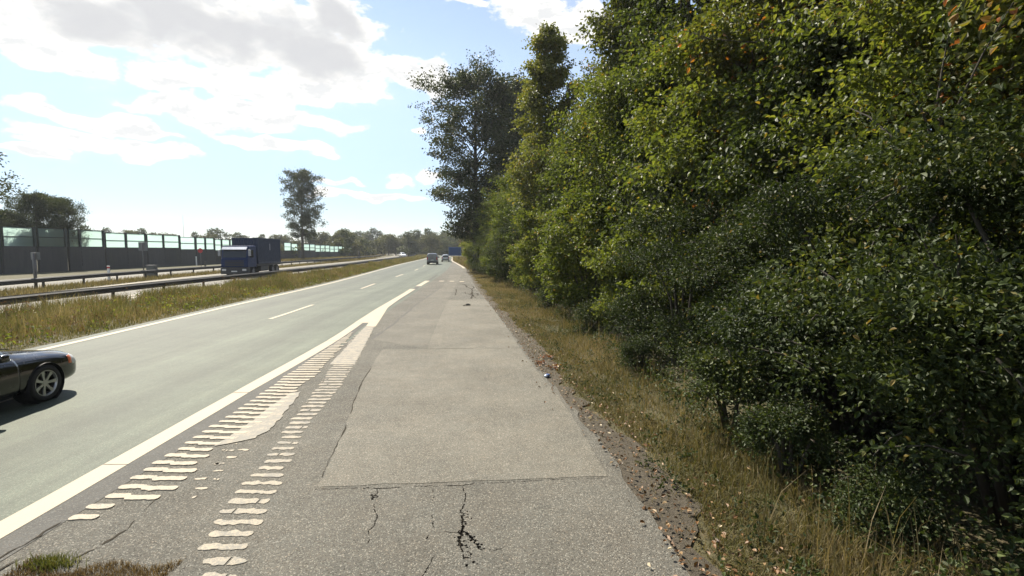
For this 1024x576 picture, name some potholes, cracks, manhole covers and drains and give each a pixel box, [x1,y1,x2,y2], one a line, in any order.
crack [315,478,598,576]
crack [322,367,372,476]
crack [75,498,159,558]
